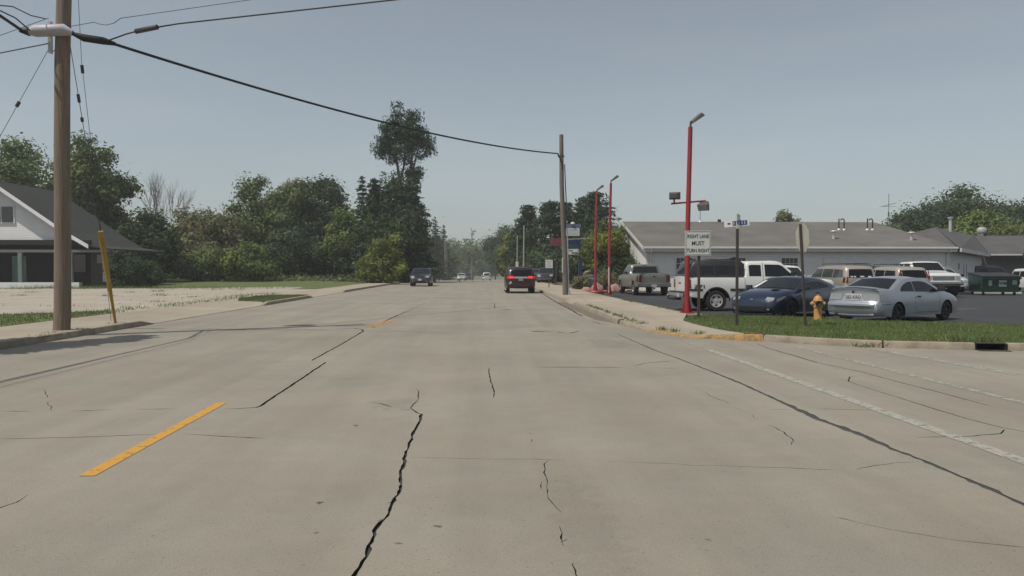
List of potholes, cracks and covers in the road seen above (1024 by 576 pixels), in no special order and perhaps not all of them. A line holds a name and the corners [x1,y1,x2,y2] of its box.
drain grate [969,340,1012,352]
crack [459,433,907,576]
crack [351,389,423,576]
